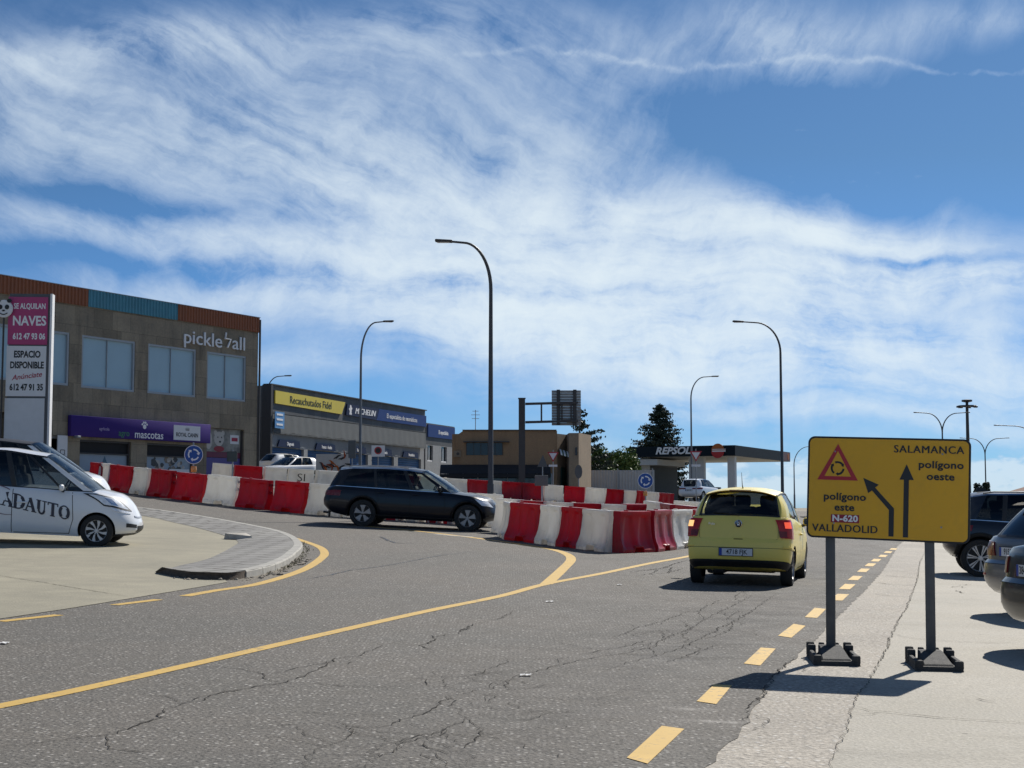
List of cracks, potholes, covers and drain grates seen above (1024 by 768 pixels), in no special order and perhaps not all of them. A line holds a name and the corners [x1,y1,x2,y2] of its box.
crack [9,643,390,756]
crack [251,631,674,768]
crack [574,589,784,669]
